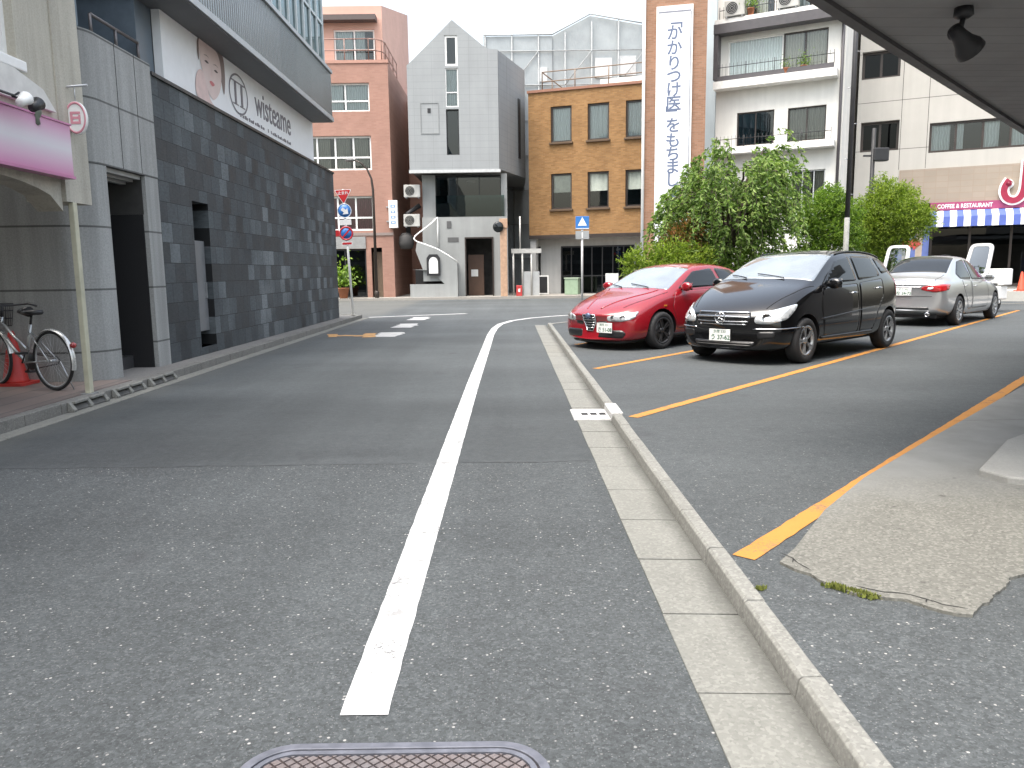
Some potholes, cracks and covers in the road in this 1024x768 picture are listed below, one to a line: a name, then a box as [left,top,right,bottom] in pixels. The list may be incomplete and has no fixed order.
crack [858,586,968,609]
manhole cover [240,741,550,768]
